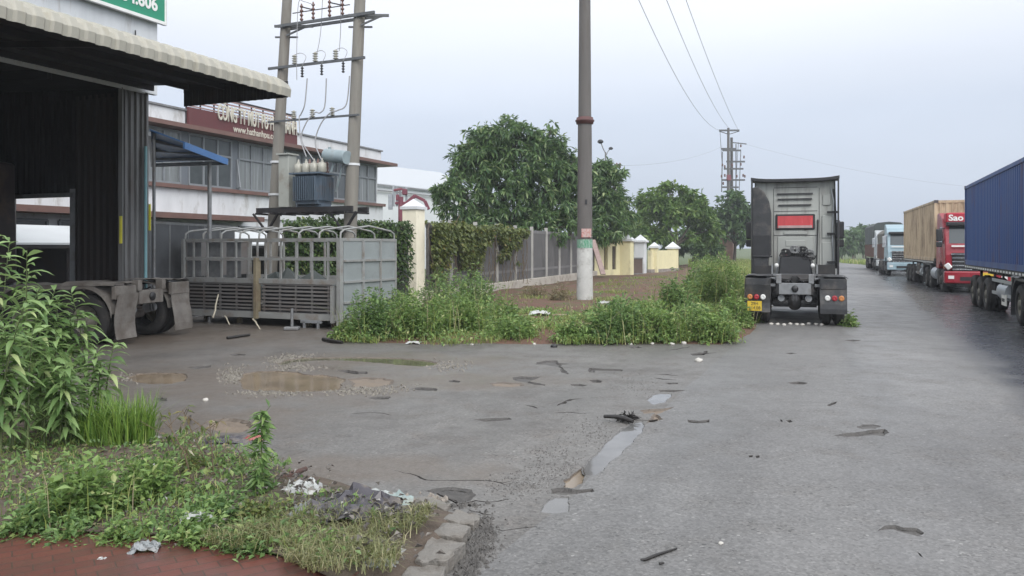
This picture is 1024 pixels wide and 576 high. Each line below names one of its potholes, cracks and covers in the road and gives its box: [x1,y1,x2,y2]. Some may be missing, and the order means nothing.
pothole [426,487,476,503]
pothole [581,421,645,476]
pothole [878,525,924,536]
pothole [536,360,569,374]
pothole [202,418,254,433]
pothole [239,370,346,390]
pothole [348,377,394,387]
crack [394,470,510,507]
pothole [834,429,889,437]
